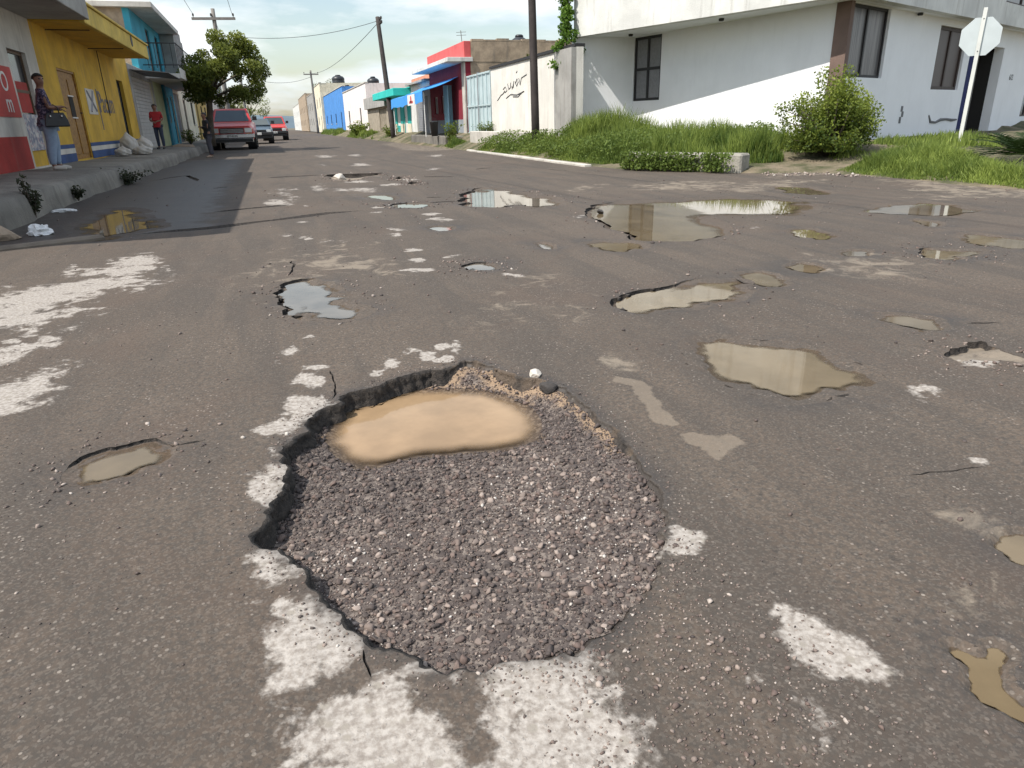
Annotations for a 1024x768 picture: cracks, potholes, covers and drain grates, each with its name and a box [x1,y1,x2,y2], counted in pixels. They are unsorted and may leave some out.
pothole [60,438,180,487]
pothole [676,333,894,406]
pothole [578,240,652,252]
pothole [938,635,1024,730]
pothole [610,276,757,314]
pothole [846,201,997,218]
crack [913,467,978,475]
pothole [944,341,1024,364]
pothole [732,270,794,287]
pothole [457,187,572,208]
crack [329,371,337,399]
pothole [248,360,670,676]
